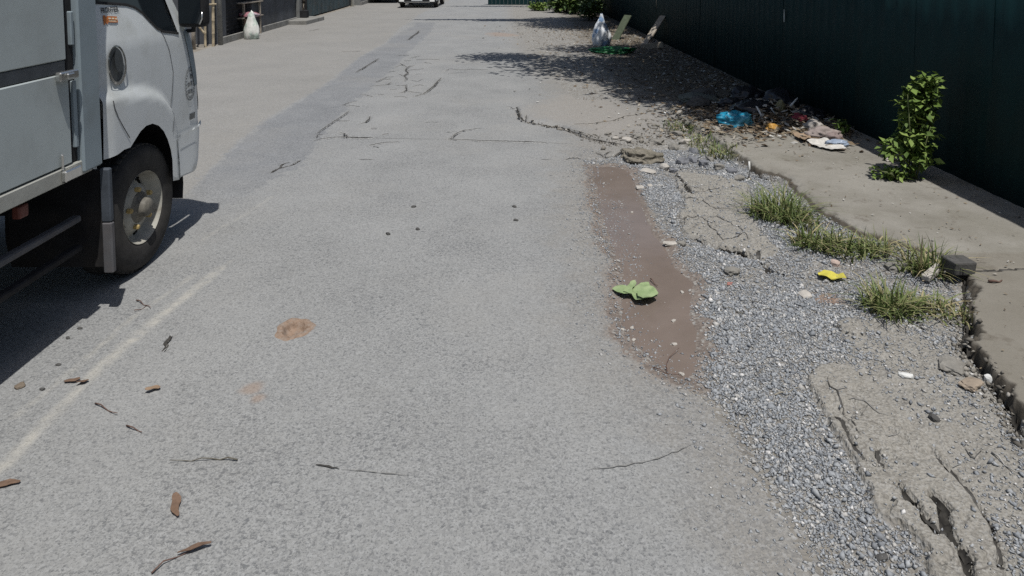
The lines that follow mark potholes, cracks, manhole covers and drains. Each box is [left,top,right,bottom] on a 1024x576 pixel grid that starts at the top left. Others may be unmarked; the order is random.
crack [828,381,899,469]
pothole [584,163,715,390]
crack [674,175,771,274]
crack [450,107,641,159]
crack [316,464,403,475]
crack [900,449,1005,576]
crack [587,443,694,470]
crack [314,55,488,160]
